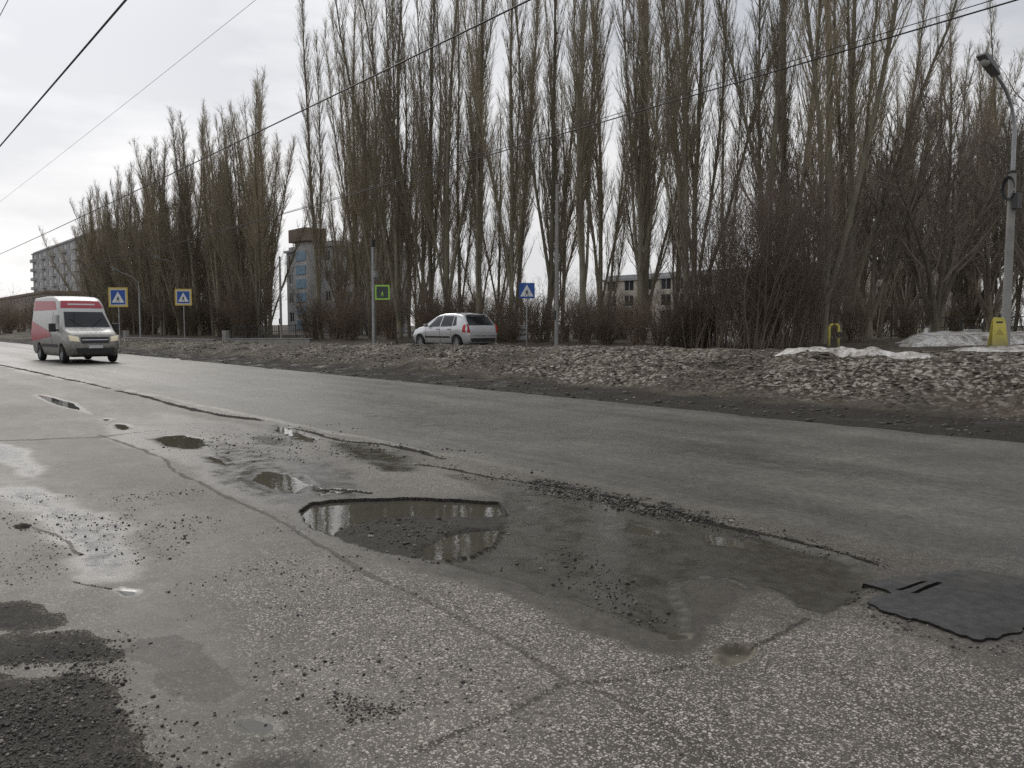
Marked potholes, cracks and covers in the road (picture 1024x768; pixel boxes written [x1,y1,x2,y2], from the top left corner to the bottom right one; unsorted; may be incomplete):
pothole [237,467,325,496]
pothole [297,497,508,562]
pothole [33,394,94,415]
crack [0,390,737,768]
pothole [145,433,215,450]
